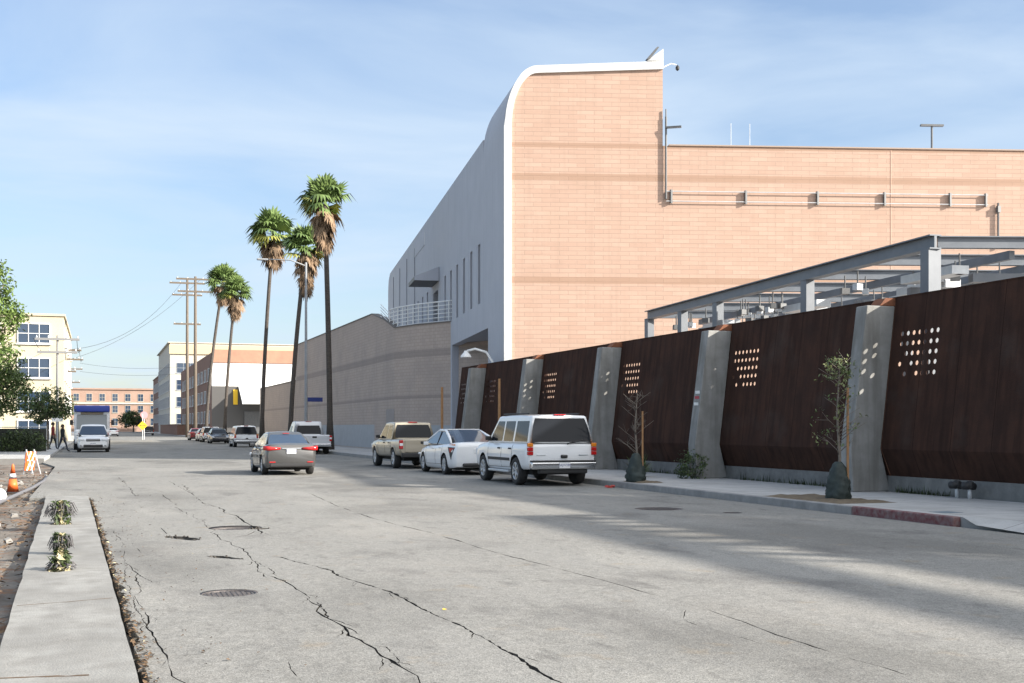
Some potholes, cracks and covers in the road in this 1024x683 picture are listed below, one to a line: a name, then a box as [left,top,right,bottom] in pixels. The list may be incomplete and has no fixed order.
manhole cover [200,589,258,597]
crack [110,532,185,683]
manhole cover [208,526,262,537]
crack [163,480,561,683]
